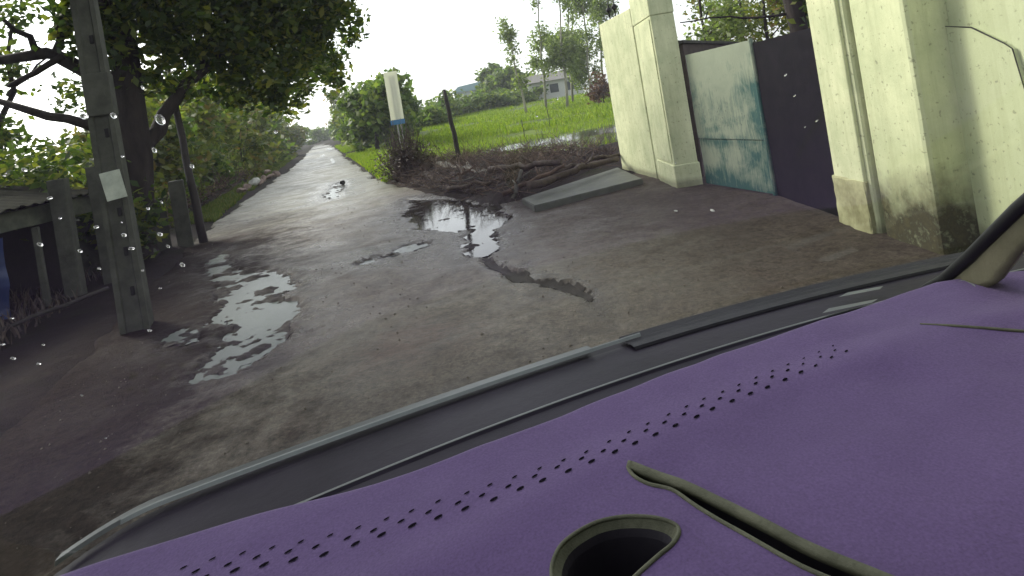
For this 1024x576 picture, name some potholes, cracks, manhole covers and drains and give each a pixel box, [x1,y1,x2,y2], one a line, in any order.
pothole [405,199,507,258]
